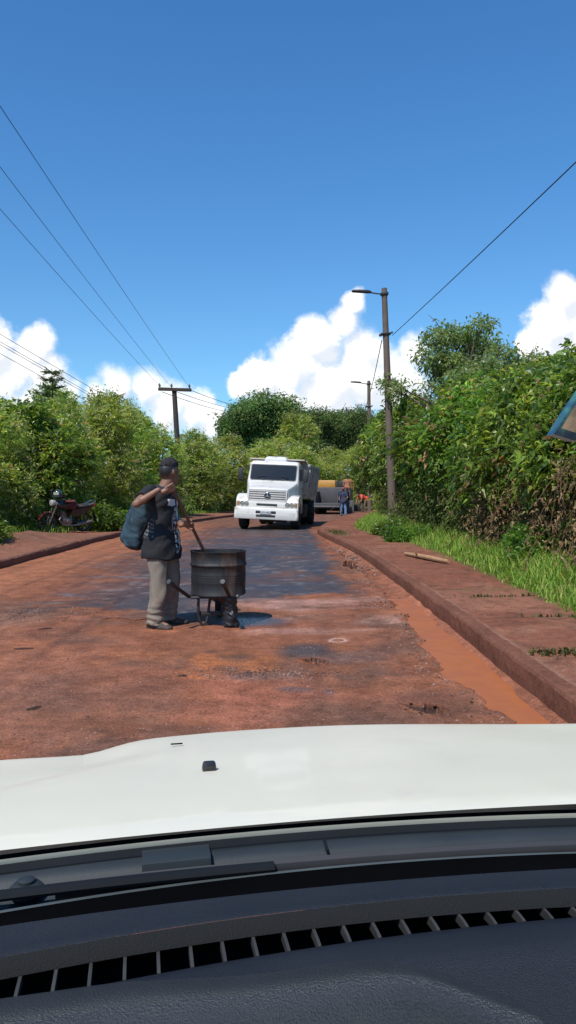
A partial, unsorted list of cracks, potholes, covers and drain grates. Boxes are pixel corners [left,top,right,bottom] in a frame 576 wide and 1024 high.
pothole [297,657,329,665]
pothole [341,560,363,571]
pothole [397,701,449,717]
